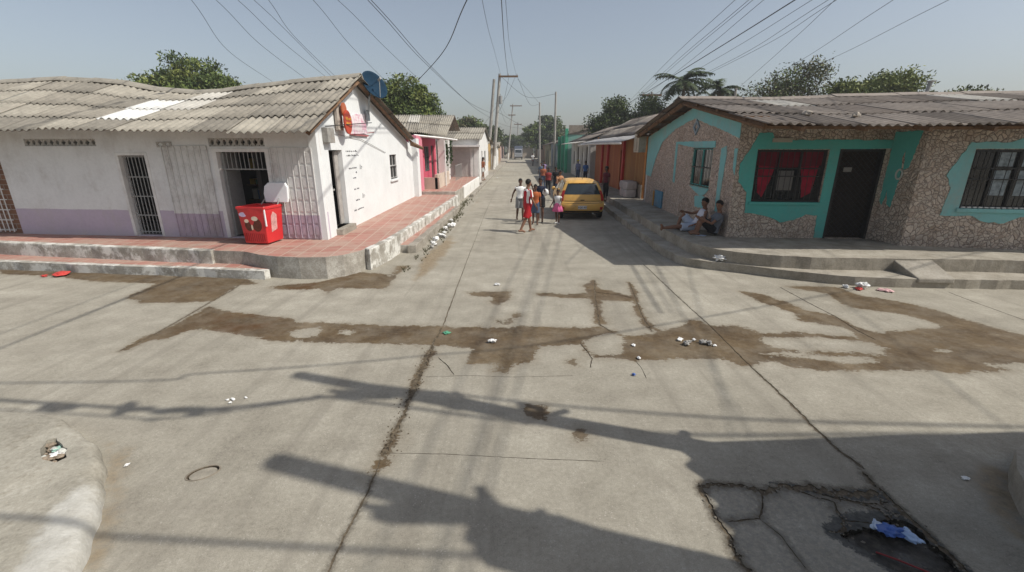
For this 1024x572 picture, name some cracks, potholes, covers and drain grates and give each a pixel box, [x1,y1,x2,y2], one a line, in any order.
crack [697,472,969,572]
pothole [840,519,960,572]
manhole cover [184,465,221,481]
crack [434,358,542,377]
